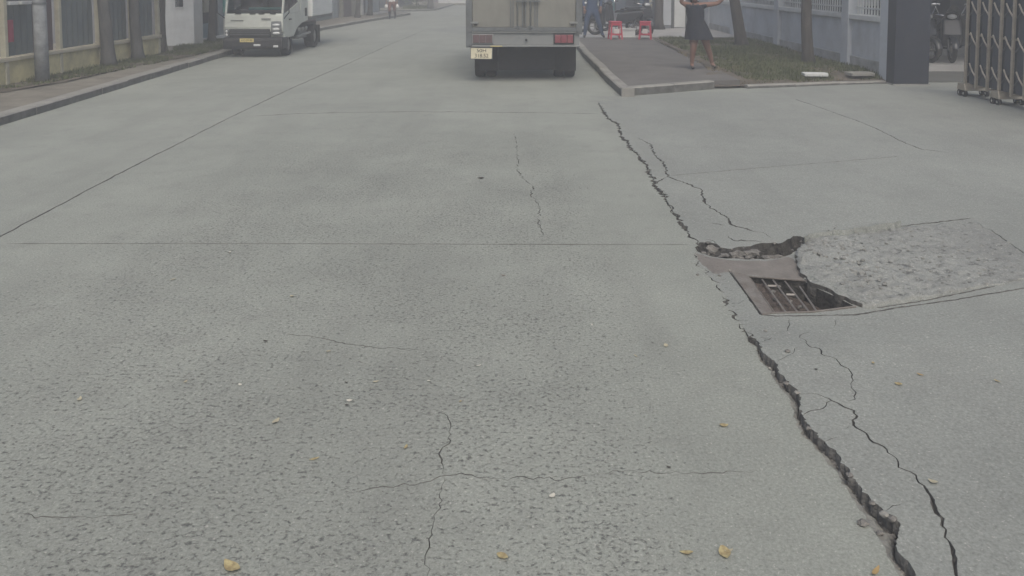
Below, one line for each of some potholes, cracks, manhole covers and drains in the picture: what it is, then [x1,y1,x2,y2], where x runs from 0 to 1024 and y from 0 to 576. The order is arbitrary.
drain grate [730,272,856,316]
pothole [695,236,804,260]
crack [597,102,958,576]
crack [345,412,753,576]
crack [515,137,544,235]
crack [280,333,419,350]
